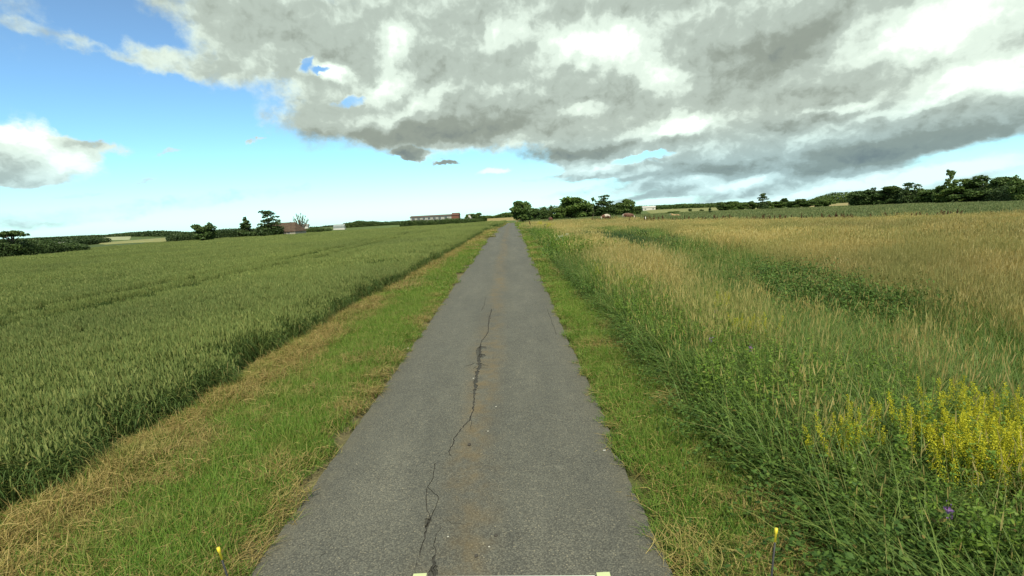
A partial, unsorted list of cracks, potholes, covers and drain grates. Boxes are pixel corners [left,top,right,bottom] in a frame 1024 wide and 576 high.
crack [415,306,492,576]
